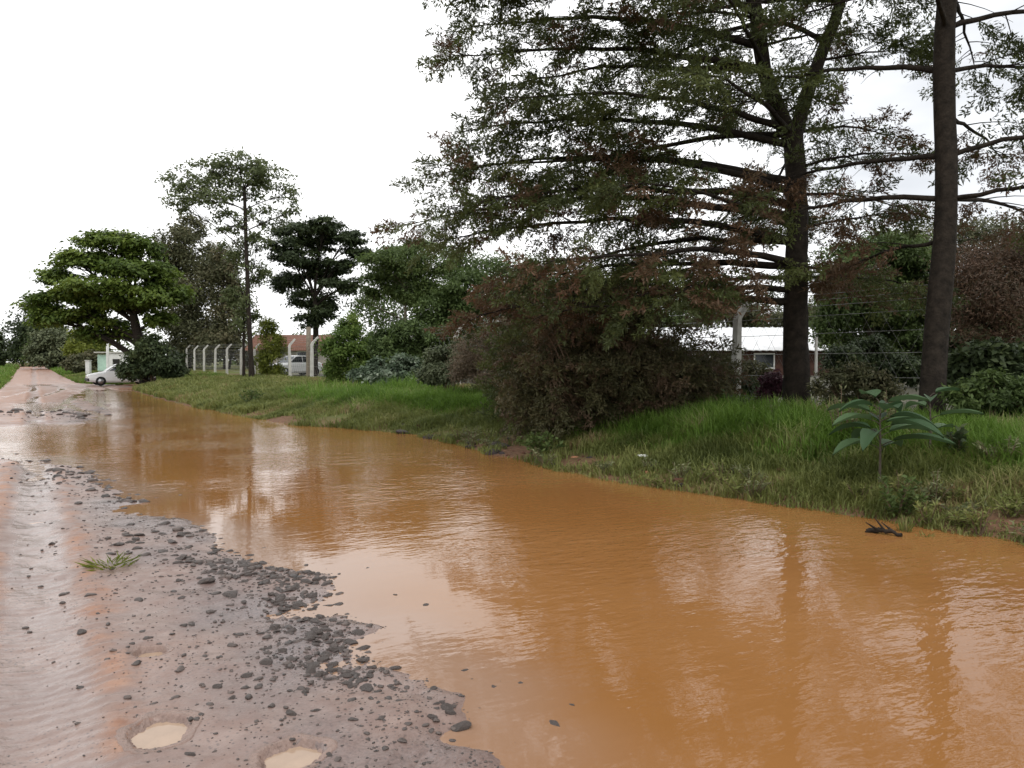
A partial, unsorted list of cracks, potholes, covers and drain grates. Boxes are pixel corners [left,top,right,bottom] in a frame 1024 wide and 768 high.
pothole [248,733,338,768]
pothole [115,708,202,754]
